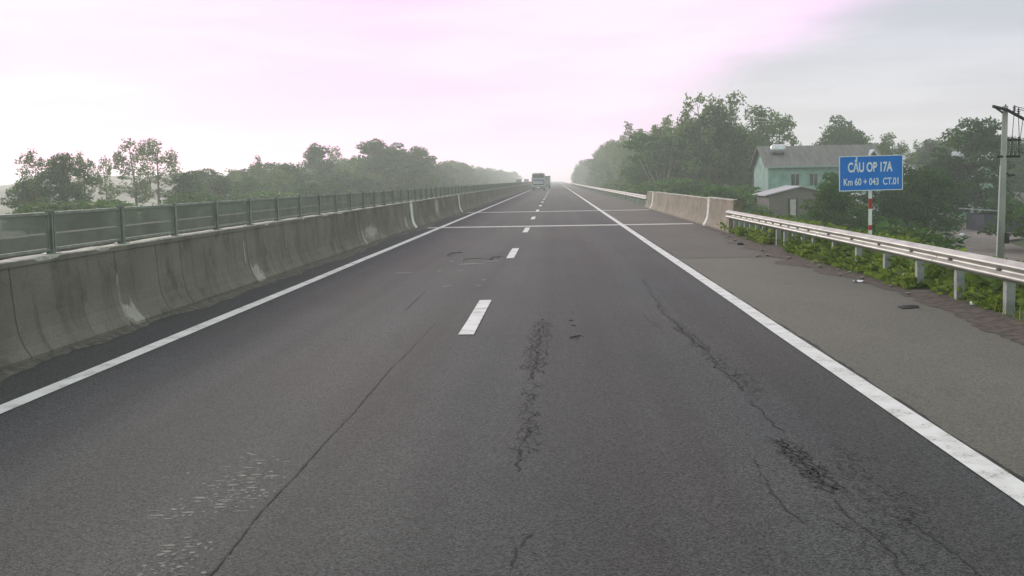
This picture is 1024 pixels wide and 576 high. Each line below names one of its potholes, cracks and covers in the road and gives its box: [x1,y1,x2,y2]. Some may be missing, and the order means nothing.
crack [639,276,982,576]
crack [508,320,553,471]
crack [509,531,534,575]
crack [208,323,435,576]
